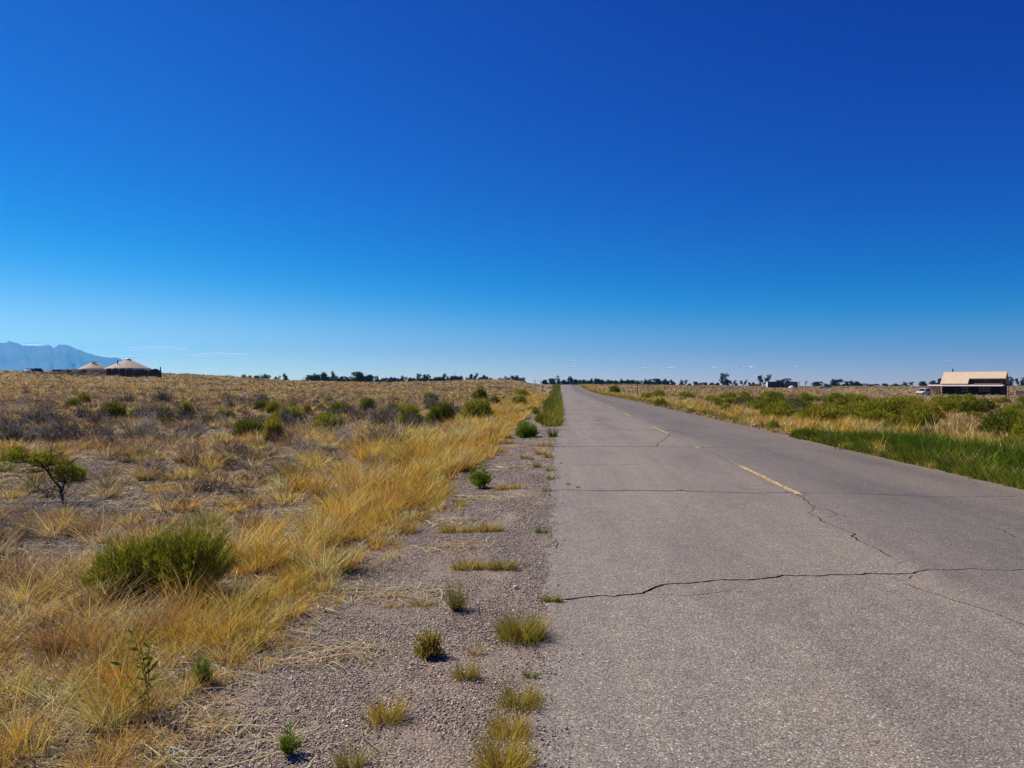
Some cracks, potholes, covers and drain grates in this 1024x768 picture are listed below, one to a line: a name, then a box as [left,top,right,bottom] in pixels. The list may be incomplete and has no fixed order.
crack [561,414,840,463]
crack [546,490,1024,625]
